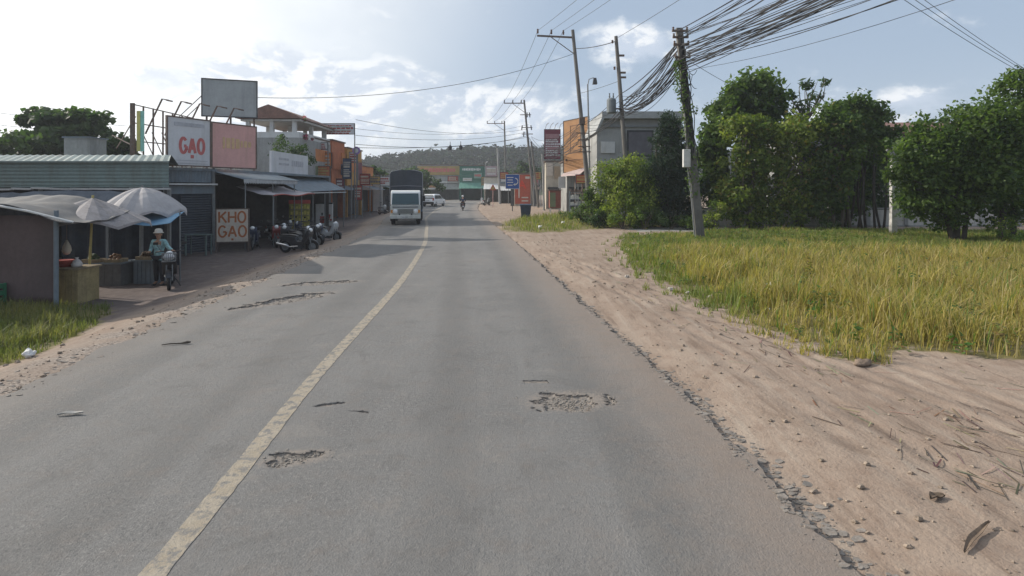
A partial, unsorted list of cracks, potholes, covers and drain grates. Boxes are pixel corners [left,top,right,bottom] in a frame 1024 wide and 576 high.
pothole [516,390,617,413]
pothole [181,290,338,314]
pothole [263,449,333,468]
